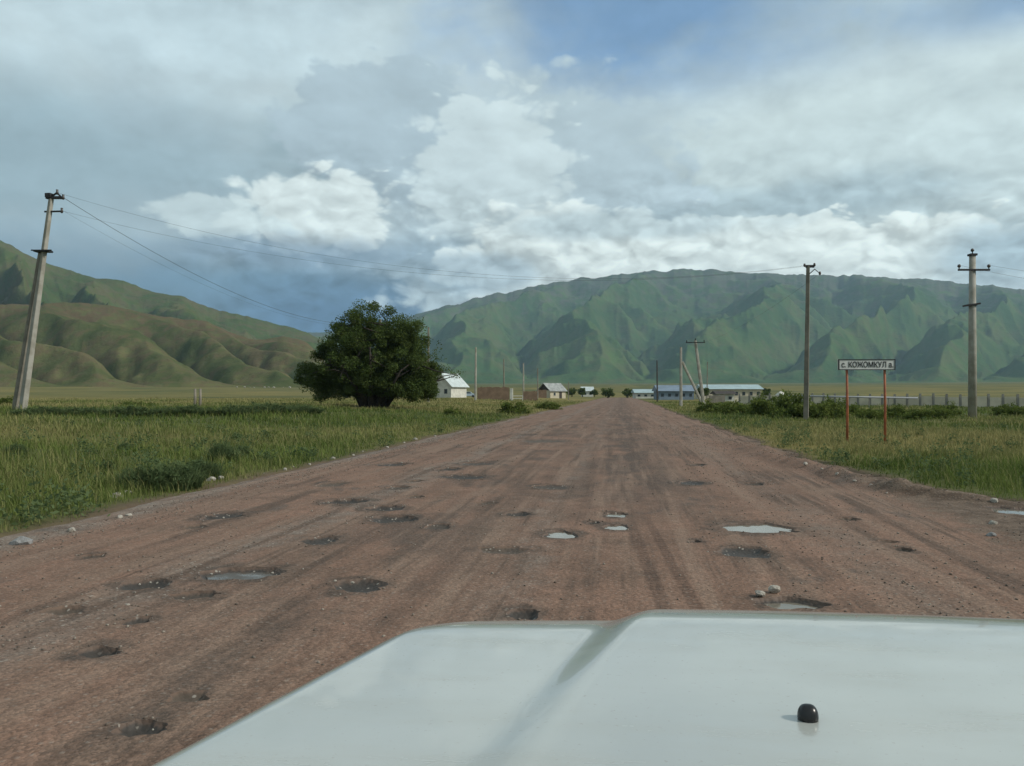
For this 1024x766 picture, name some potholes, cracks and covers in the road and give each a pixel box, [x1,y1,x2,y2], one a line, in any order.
pothole [368,515,419,523]
pothole [506,608,541,620]
pothole [543,530,578,539]
pothole [200,511,244,520]
pothole [715,546,771,558]
pothole [713,522,800,533]
pothole [332,578,389,593]
pothole [298,535,338,545]
pothole [751,596,832,609]
pothole [111,719,168,737]
pothole [73,645,121,658]
pothole [117,577,172,590]
